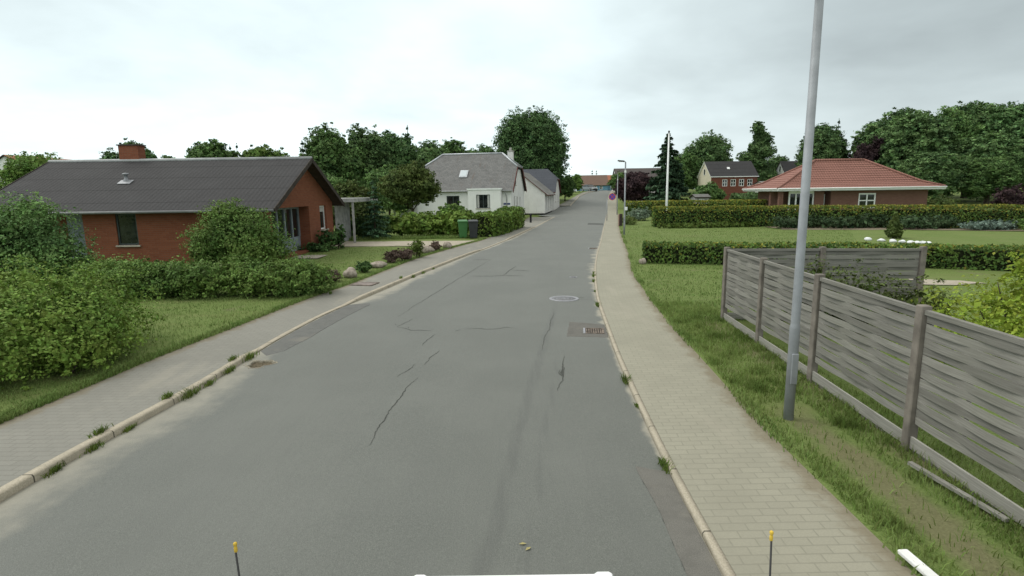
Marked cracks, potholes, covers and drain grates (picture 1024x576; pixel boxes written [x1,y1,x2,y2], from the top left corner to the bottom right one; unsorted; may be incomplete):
pothole [243,359,278,369]
crack [541,320,565,390]
crack [371,265,481,443]
